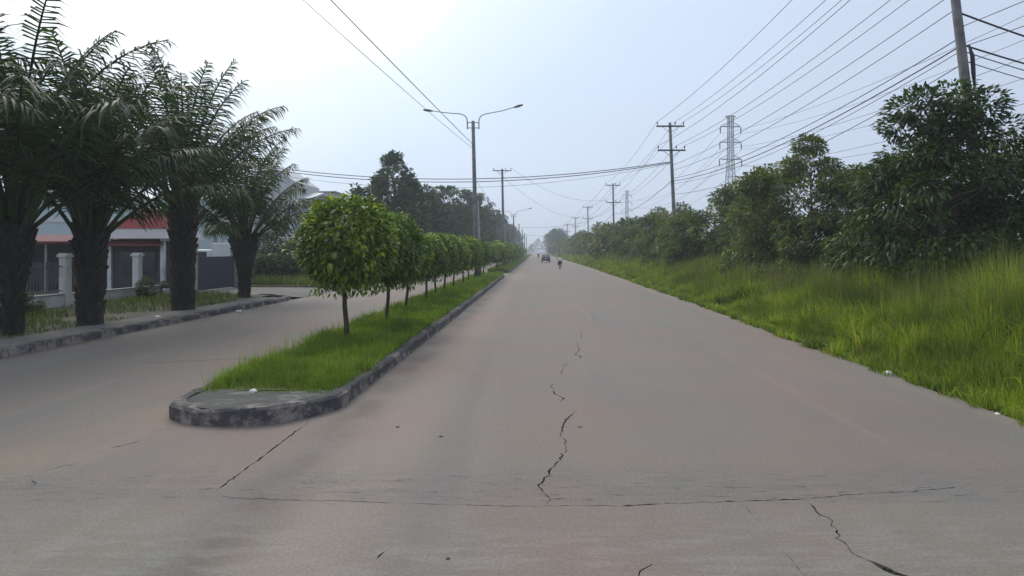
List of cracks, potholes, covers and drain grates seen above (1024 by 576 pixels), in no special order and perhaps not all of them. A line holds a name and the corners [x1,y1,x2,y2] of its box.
crack [216,317,955,576]
